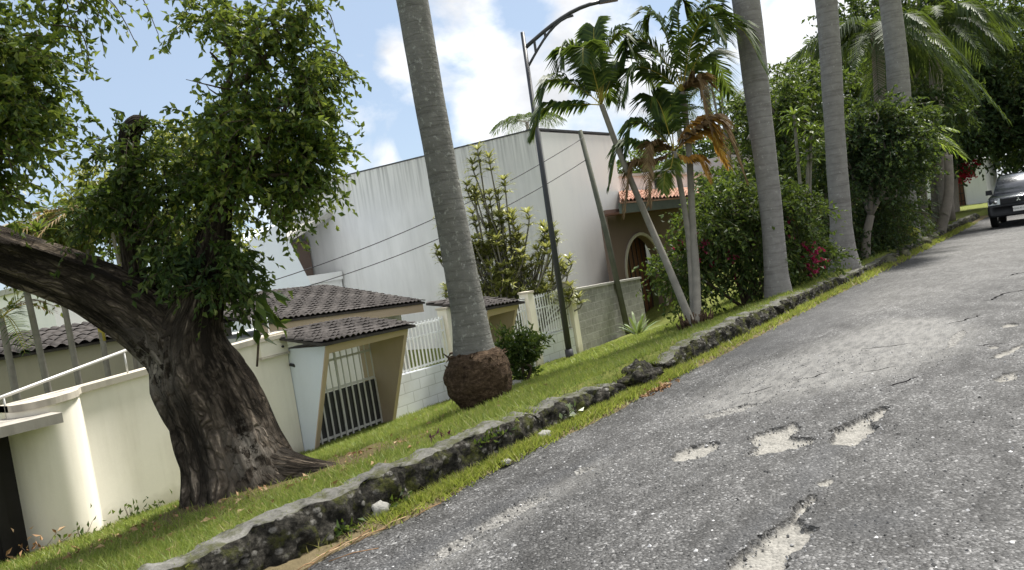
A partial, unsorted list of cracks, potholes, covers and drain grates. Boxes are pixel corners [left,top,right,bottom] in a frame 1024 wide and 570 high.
pothole [668,441,721,462]
pothole [743,421,817,457]
pothole [992,370,1019,382]
pothole [725,493,820,570]
pothole [827,406,890,446]
crack [949,273,1022,324]
pothole [988,343,1024,359]
